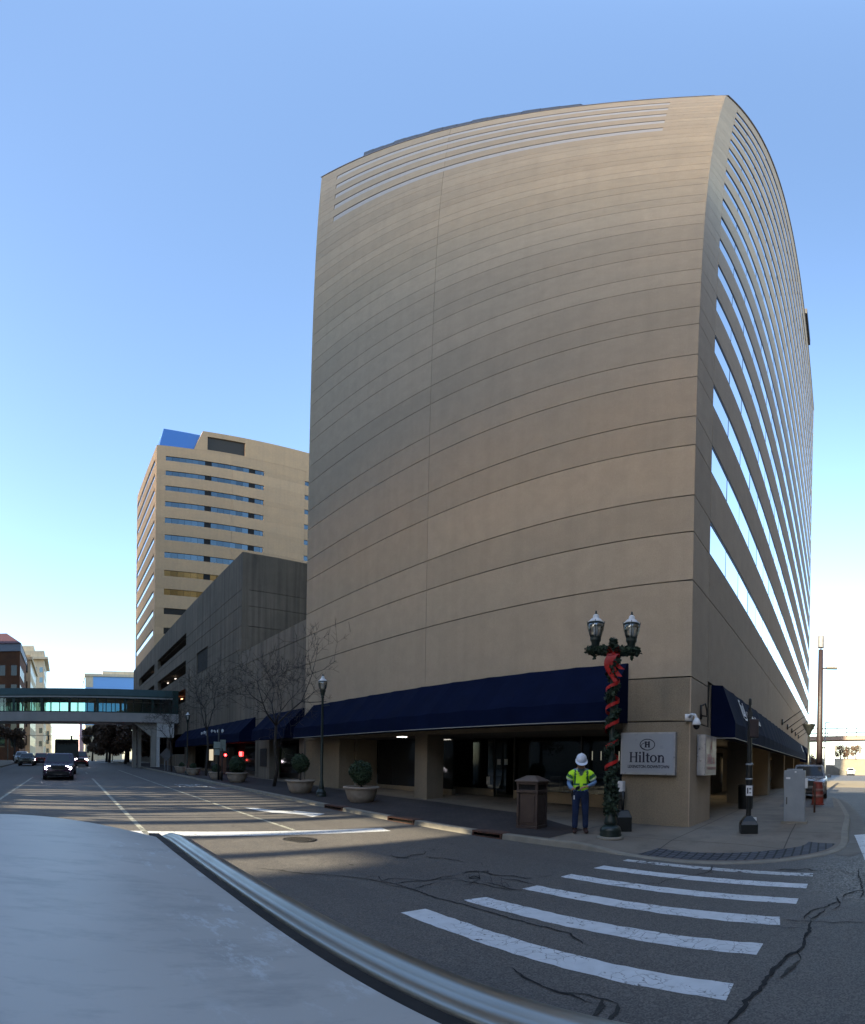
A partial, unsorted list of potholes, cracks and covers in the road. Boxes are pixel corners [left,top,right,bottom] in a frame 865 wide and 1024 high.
crack [263,850,583,944]
crack [727,868,865,1024]
drain grate [387,815,421,825]
drain grate [472,829,509,839]
